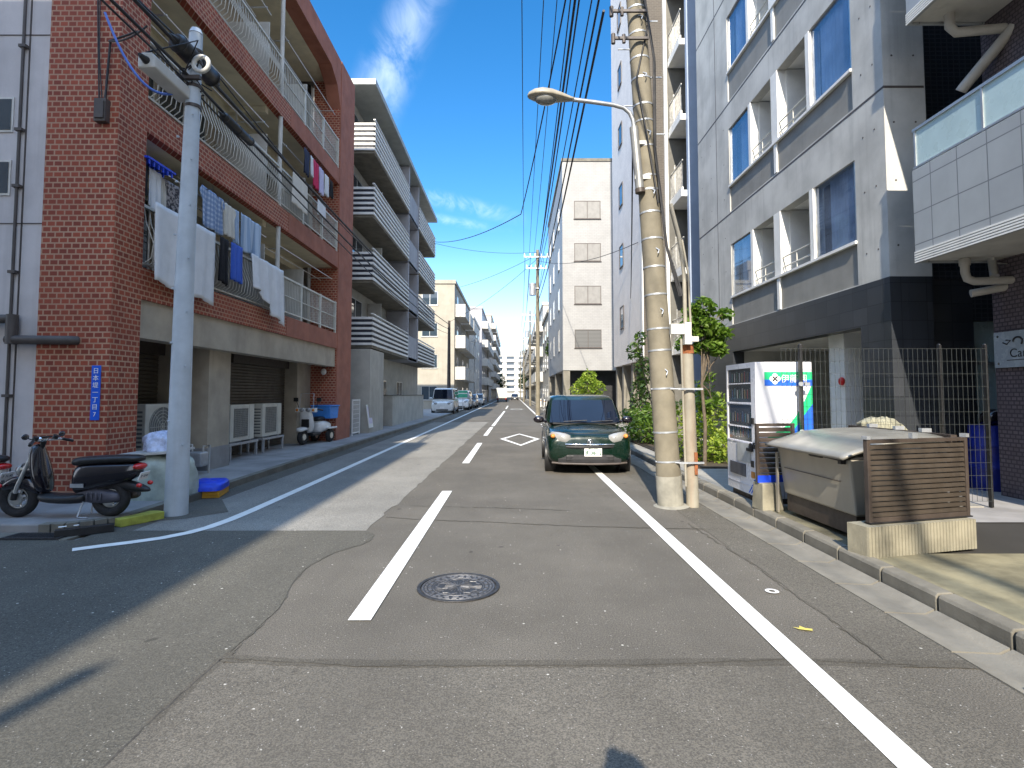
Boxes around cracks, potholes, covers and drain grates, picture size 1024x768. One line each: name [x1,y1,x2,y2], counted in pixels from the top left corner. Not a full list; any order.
manhole cover [417,573,500,602]
